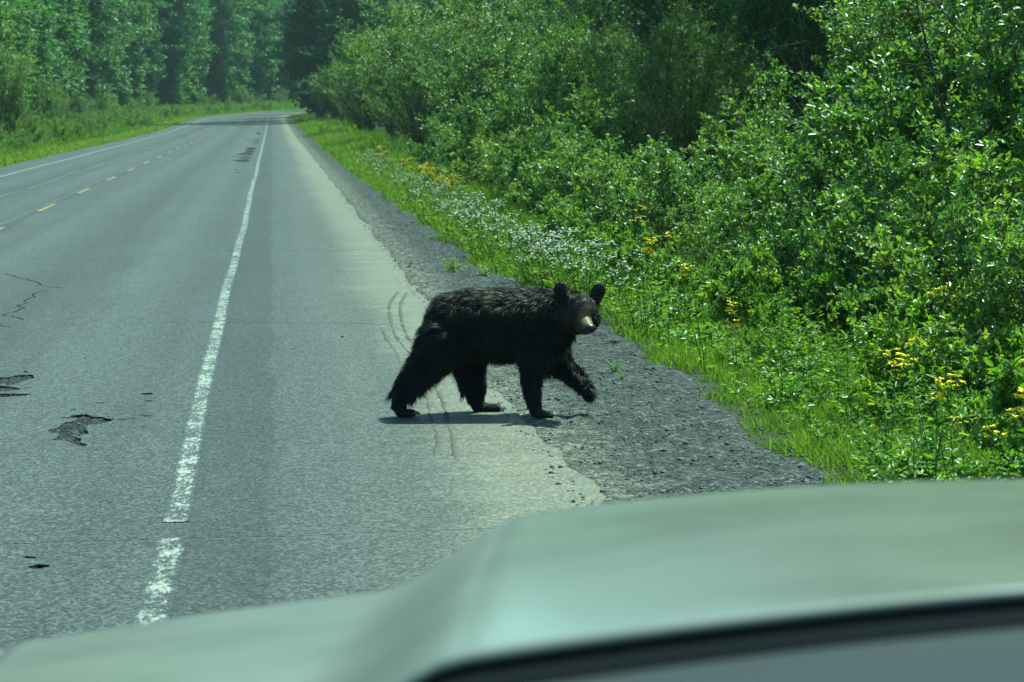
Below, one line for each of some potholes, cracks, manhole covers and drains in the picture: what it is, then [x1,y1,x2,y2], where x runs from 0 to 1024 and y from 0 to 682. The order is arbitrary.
pothole [48,414,114,447]
crack [0,273,59,327]
pothole [0,375,34,385]
